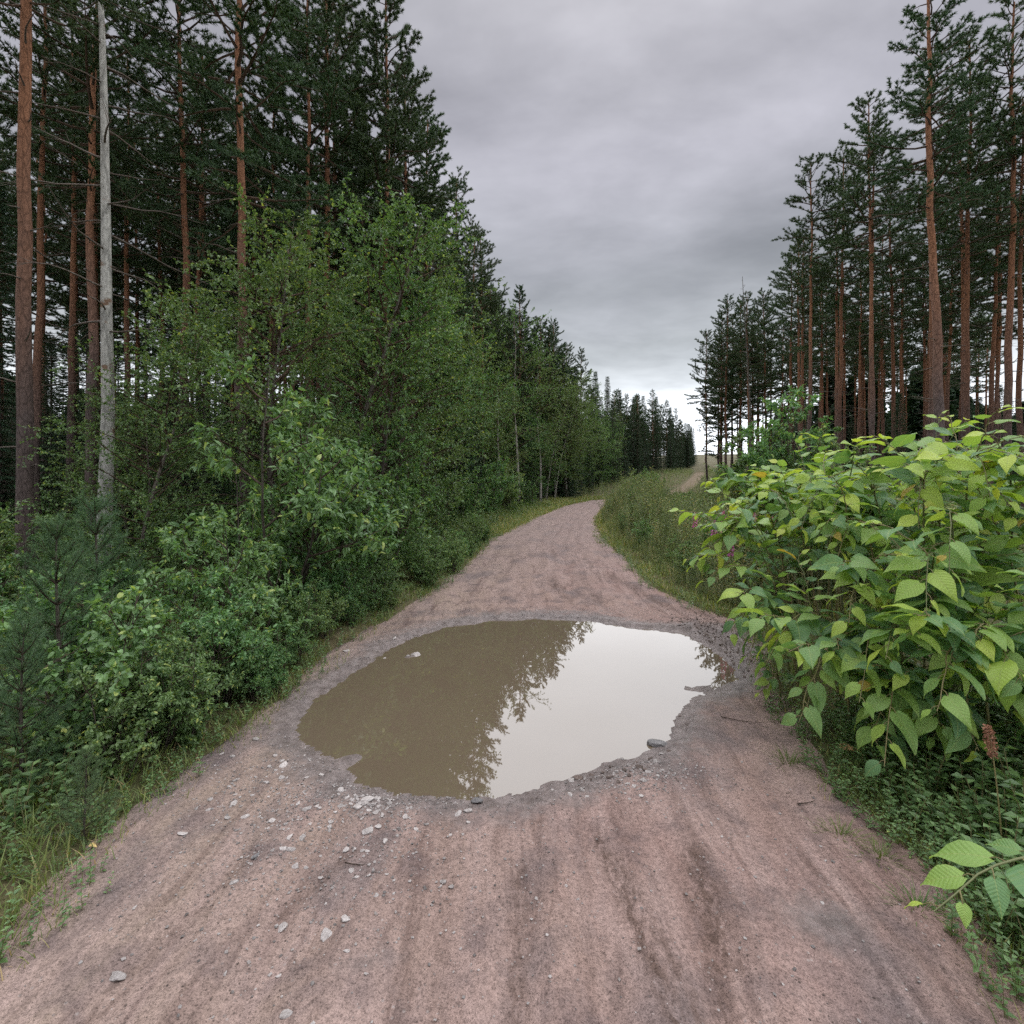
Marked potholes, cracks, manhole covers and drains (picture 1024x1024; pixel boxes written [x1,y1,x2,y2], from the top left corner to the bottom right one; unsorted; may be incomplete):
pothole [257,610,775,821]
